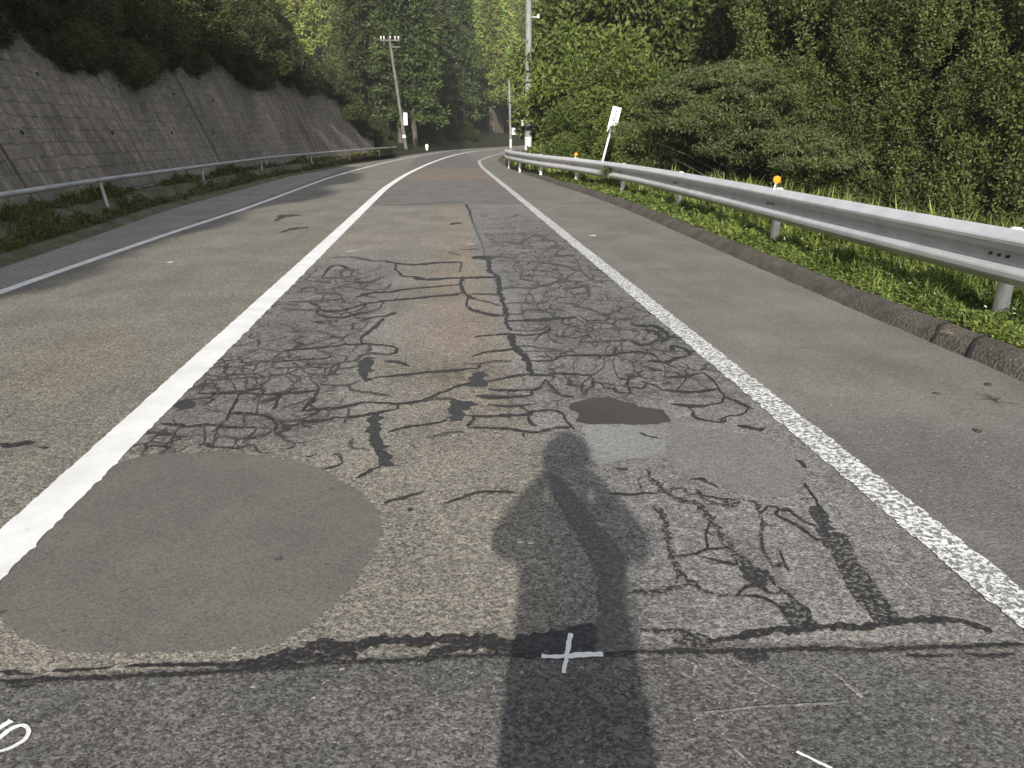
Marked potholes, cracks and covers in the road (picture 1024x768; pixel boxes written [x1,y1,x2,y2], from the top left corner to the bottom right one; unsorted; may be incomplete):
crack [145,204,766,511]
crack [0,440,48,449]
crack [609,459,898,624]
